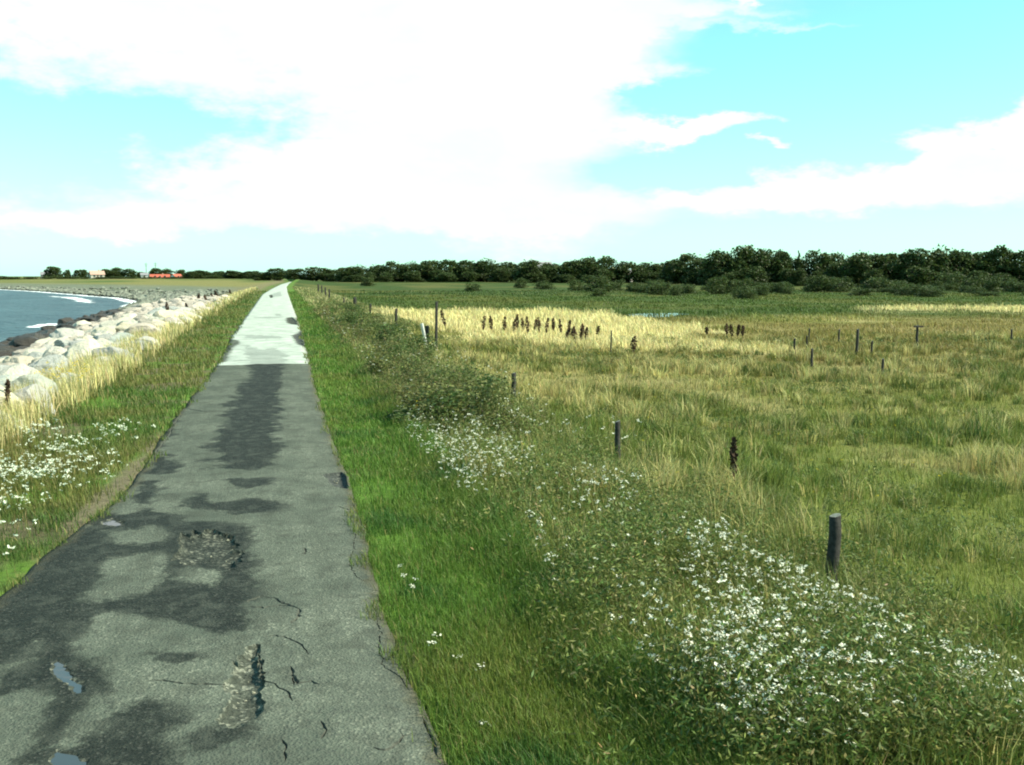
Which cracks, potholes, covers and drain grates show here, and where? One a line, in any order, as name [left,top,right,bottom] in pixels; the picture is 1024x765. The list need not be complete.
pothole [48,748,90,765]
crack [320,721,328,739]
crack [377,621,410,691]
pothole [100,518,128,527]
pothole [50,659,86,693]
pothole [214,644,267,729]
pothole [321,472,349,489]
pothole [171,529,245,571]
crack [233,596,319,701]
